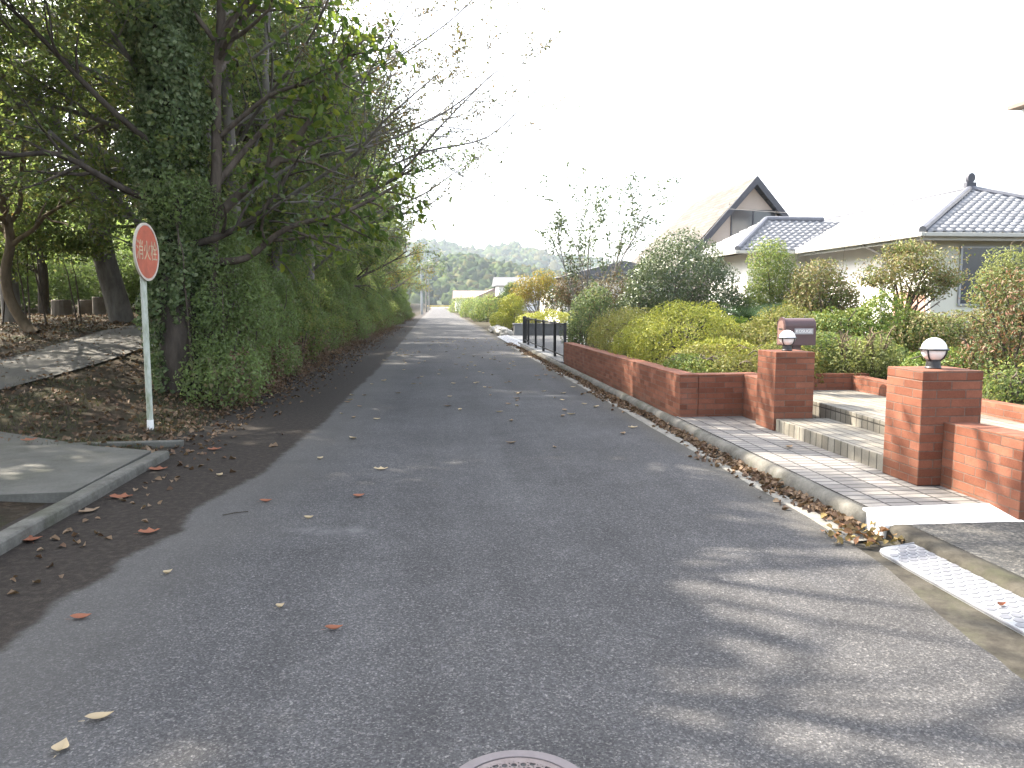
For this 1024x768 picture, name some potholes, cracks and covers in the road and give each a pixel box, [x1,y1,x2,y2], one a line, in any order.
manhole cover [459,750,579,768]
